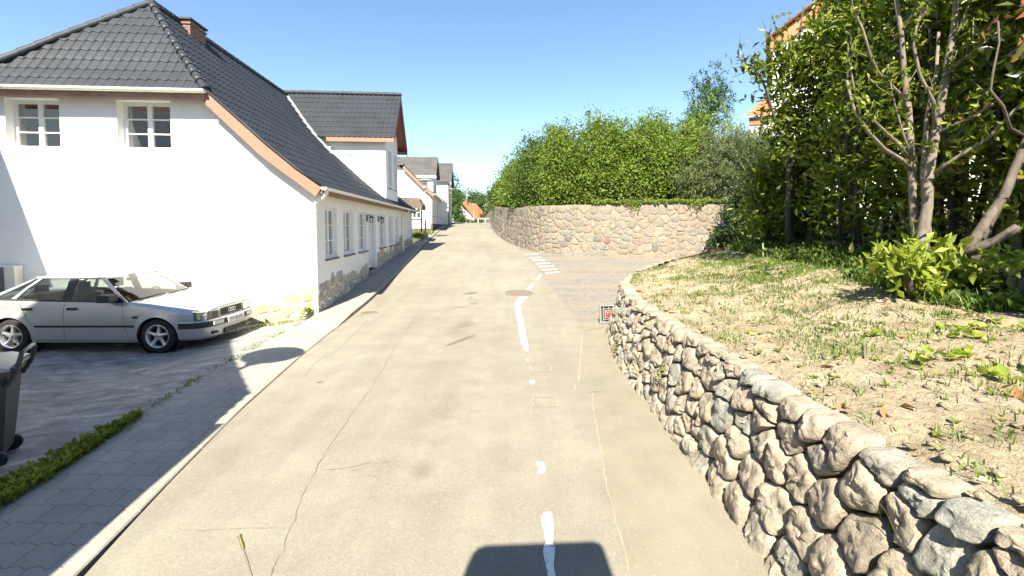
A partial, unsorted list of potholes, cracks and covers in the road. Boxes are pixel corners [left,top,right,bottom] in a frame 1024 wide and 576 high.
crack [182,297,426,574]
